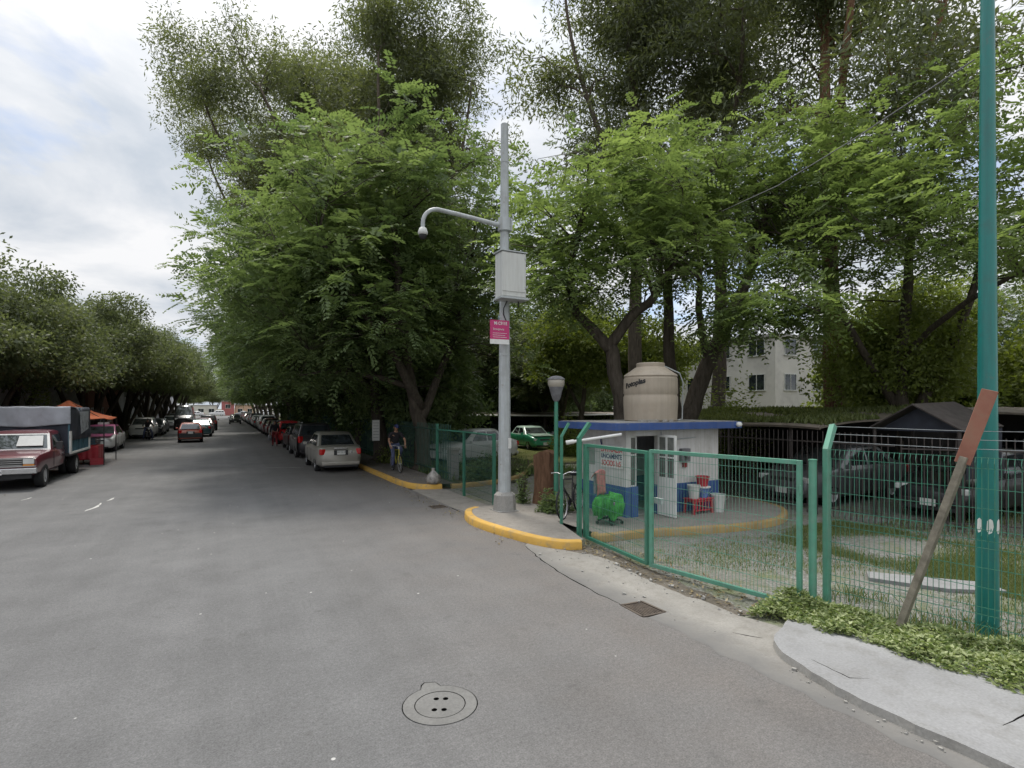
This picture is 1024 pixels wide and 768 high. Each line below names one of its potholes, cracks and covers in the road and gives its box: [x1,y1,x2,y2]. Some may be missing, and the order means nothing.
manhole cover [403,682,477,726]
drain grate [620,601,666,617]
